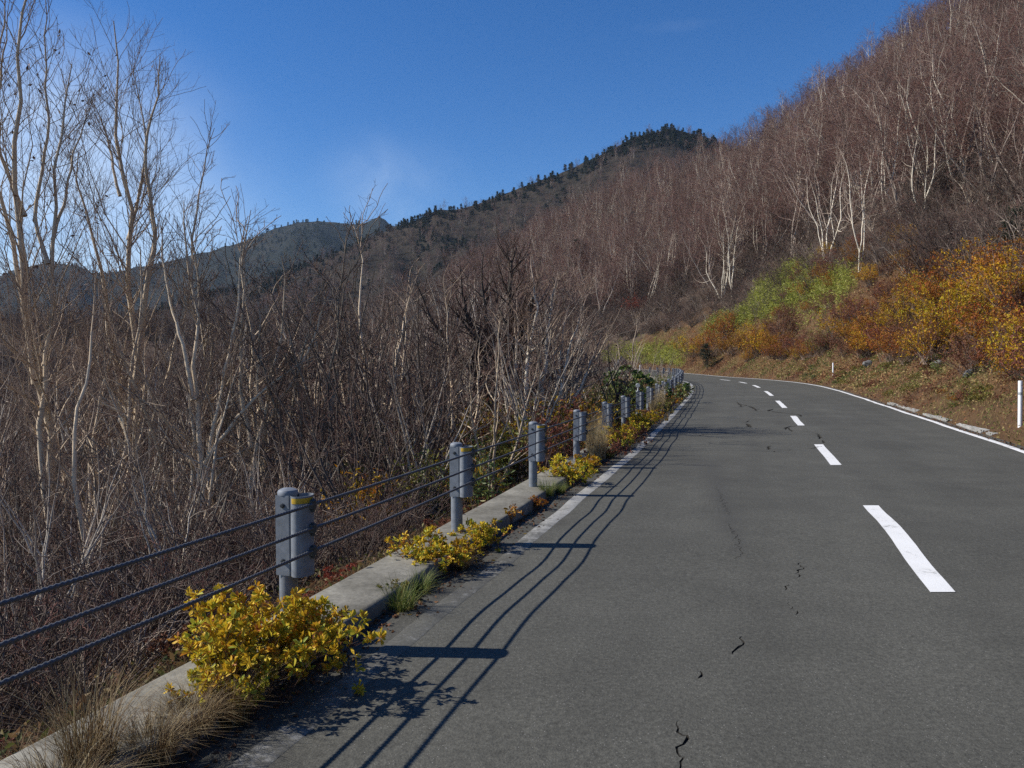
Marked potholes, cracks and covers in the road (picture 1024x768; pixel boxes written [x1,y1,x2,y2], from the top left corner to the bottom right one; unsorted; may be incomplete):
crack [675,722,690,768]
crack [738,395,825,452]
